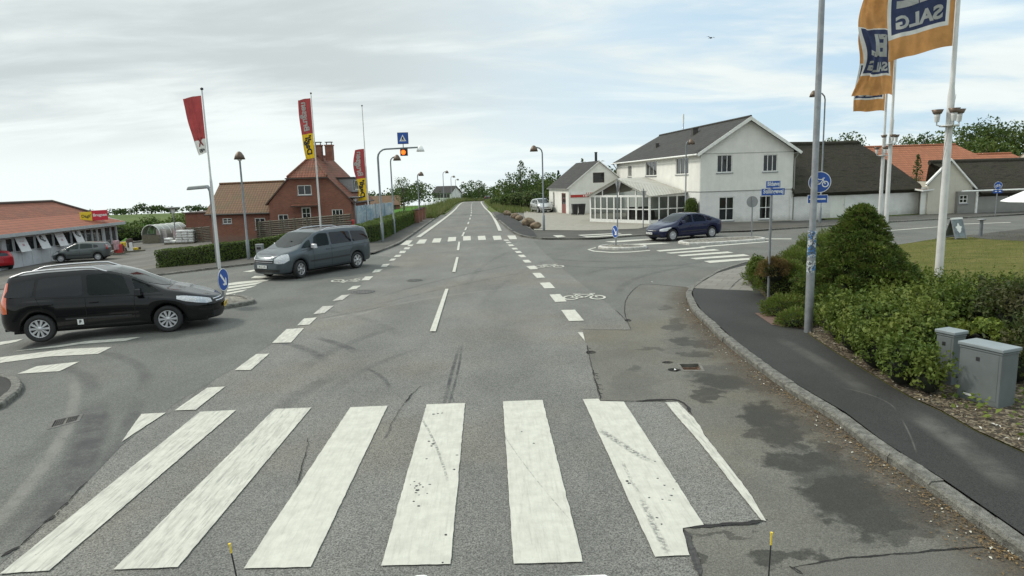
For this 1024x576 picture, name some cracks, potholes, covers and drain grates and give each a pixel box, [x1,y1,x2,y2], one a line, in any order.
drain grate [47,414,83,430]
drain grate [676,363,705,371]
